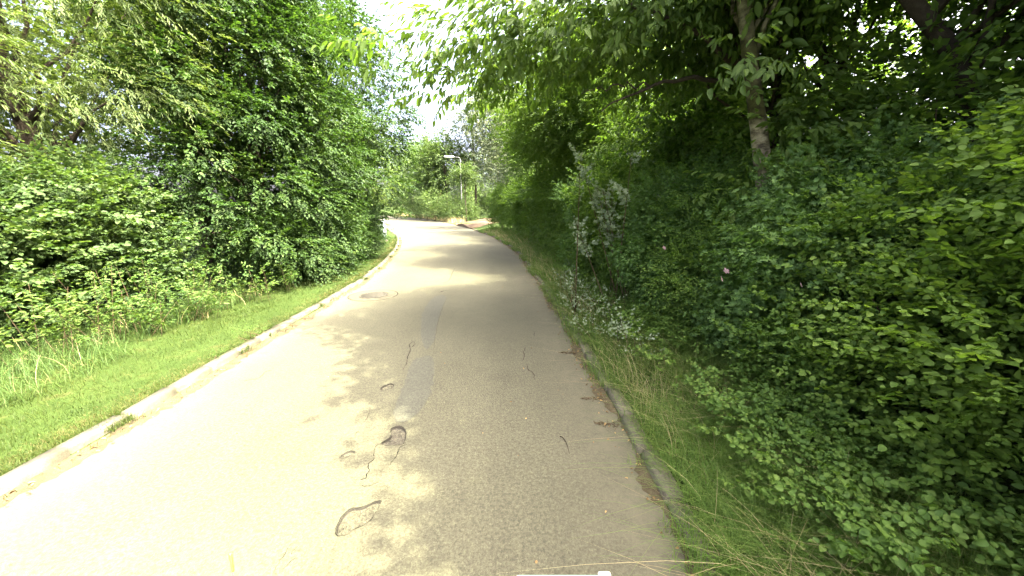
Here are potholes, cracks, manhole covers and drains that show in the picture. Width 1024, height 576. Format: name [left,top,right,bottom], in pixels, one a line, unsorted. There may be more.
manhole cover [347,290,398,301]
